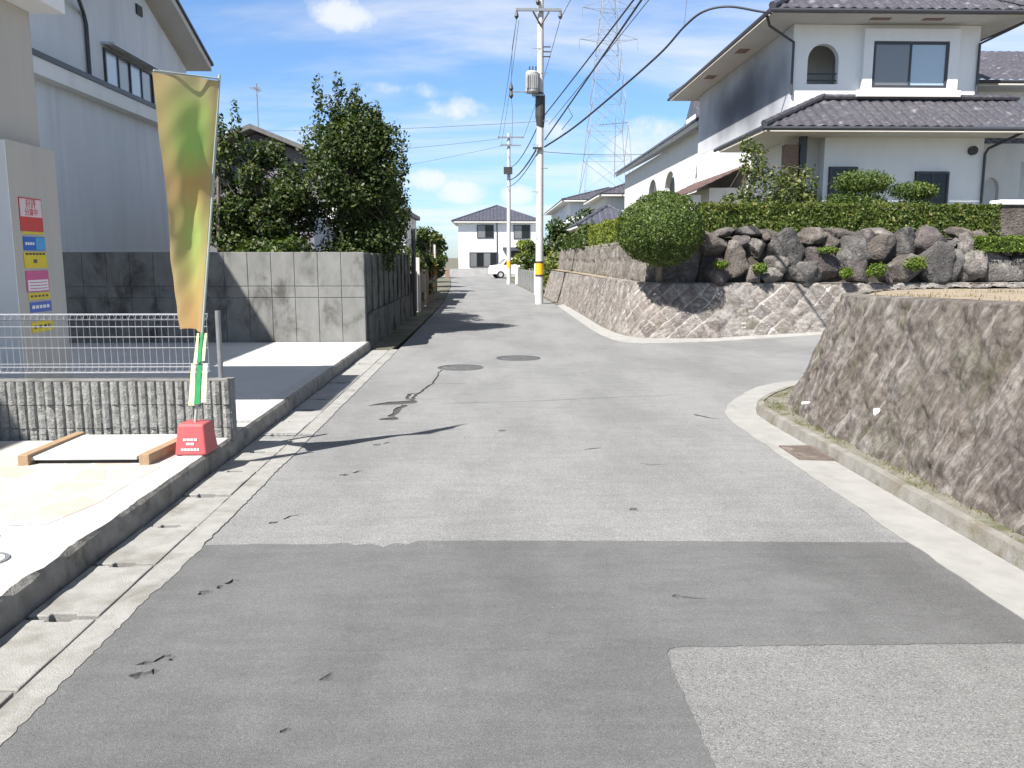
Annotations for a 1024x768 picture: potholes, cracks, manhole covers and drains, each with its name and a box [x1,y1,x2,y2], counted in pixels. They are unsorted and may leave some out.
pothole [136,654,177,665]
pothole [128,669,160,680]
crack [369,370,473,420]
drain grate [779,445,834,461]
pothole [198,579,240,595]
